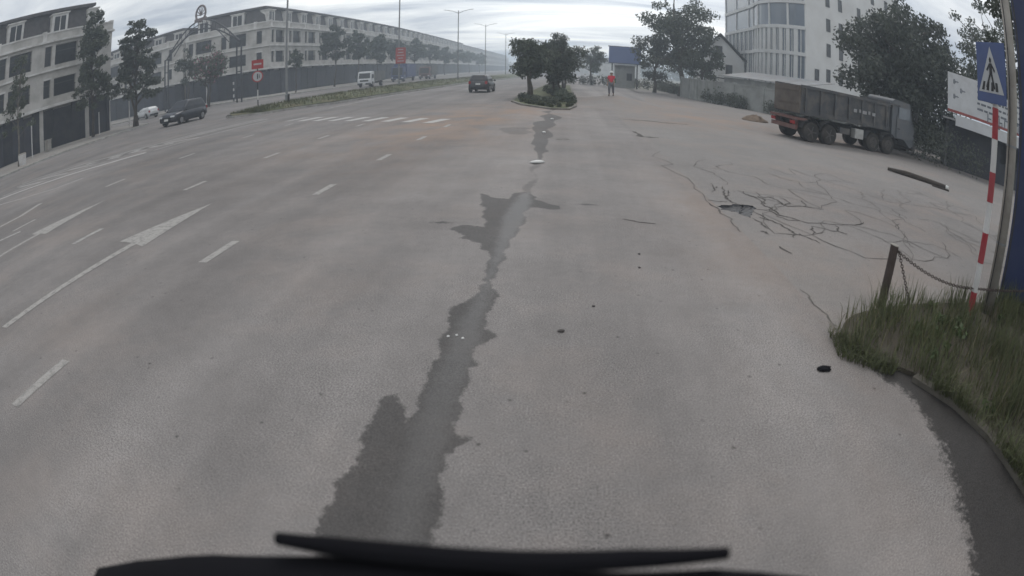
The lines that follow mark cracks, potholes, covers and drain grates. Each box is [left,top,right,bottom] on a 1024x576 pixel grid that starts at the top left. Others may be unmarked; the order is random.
crack [626,119,1003,267]
pothole [718,204,757,217]
